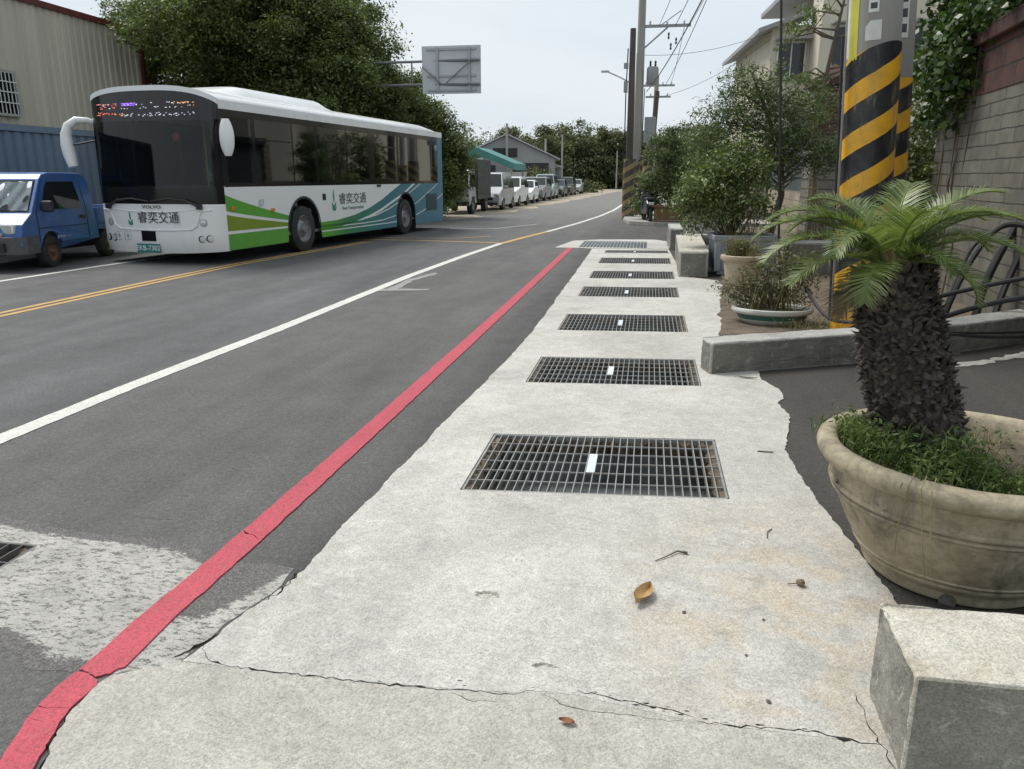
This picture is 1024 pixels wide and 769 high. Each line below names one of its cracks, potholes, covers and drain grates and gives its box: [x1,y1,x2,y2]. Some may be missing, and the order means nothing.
drain grate [579,287,679,297]
drain grate [527,357,701,386]
drain grate [0,542,37,568]
drain grate [590,271,675,279]
drain grate [462,434,728,499]
crack [174,571,895,769]
drain grate [558,314,688,332]
